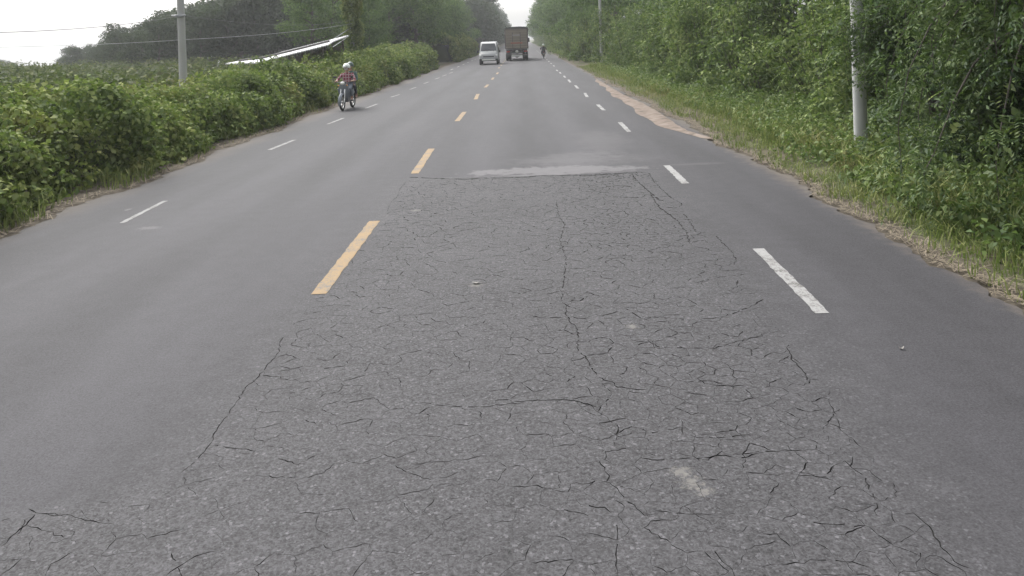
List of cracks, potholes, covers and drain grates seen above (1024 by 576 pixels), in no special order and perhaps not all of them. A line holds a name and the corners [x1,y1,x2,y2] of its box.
crack [0,172,972,576]
